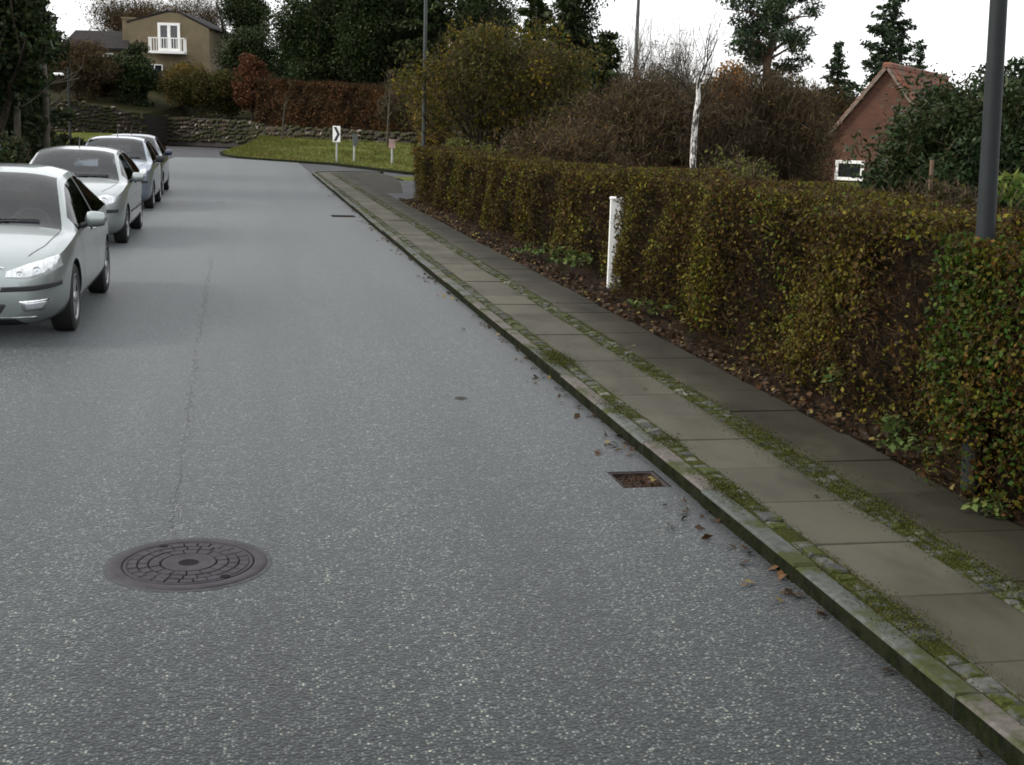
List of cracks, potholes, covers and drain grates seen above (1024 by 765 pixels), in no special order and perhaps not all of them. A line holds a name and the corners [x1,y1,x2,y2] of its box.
crack [168,258,213,537]
manhole cover [103,538,272,592]
drain grate [608,472,670,488]
